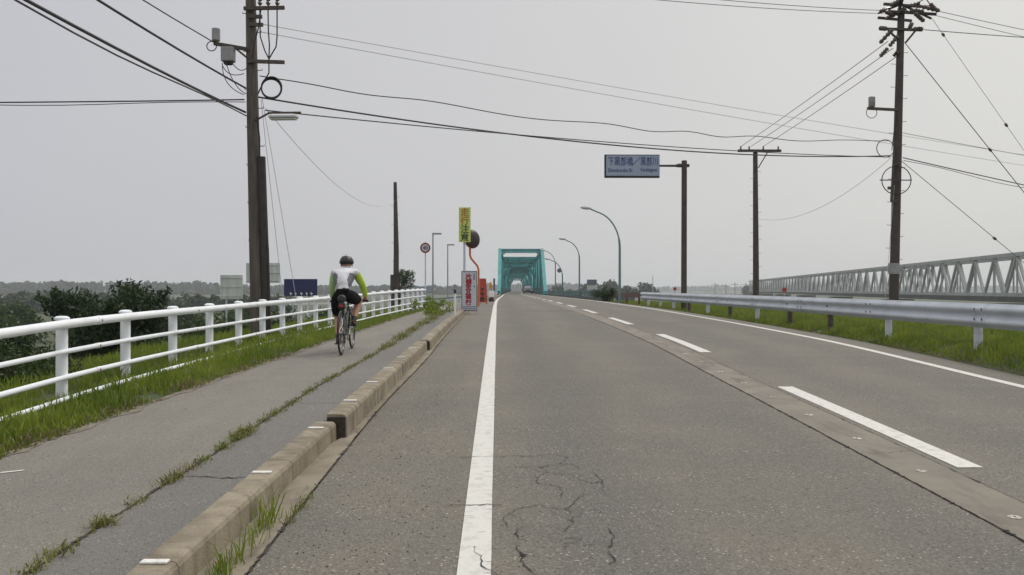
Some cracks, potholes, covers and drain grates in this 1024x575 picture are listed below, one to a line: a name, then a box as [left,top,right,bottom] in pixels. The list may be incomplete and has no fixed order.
crack [445,454,616,575]
